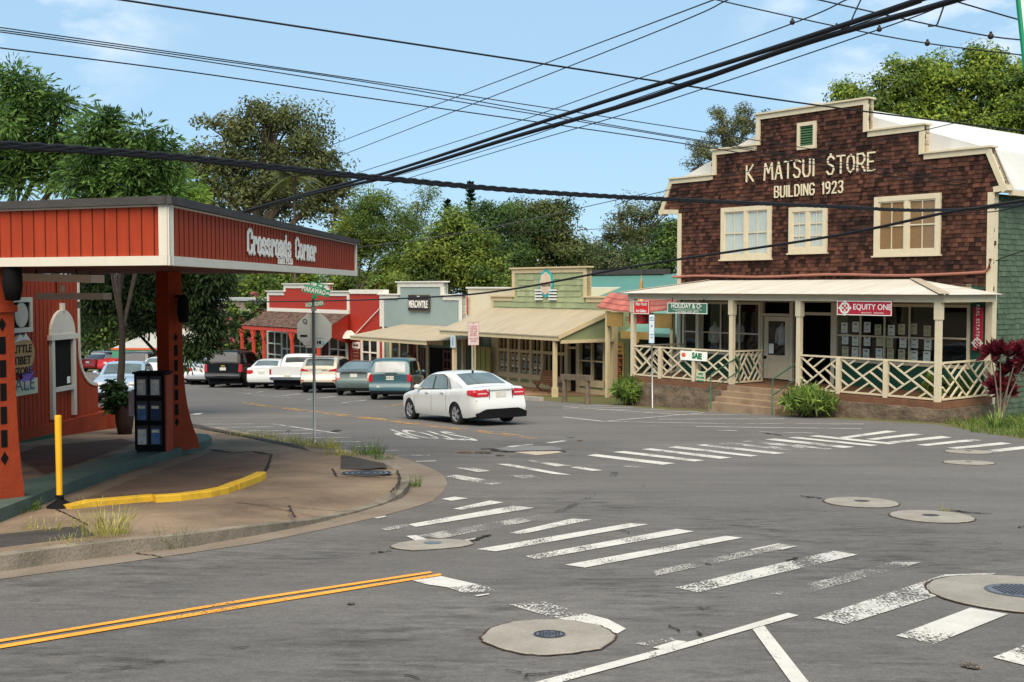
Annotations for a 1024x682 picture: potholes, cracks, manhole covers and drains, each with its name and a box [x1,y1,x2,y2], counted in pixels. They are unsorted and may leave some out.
manhole cover [479,619,618,656]
manhole cover [924,574,1024,613]
manhole cover [889,510,976,523]
manhole cover [823,497,900,508]
manhole cover [389,539,473,551]
